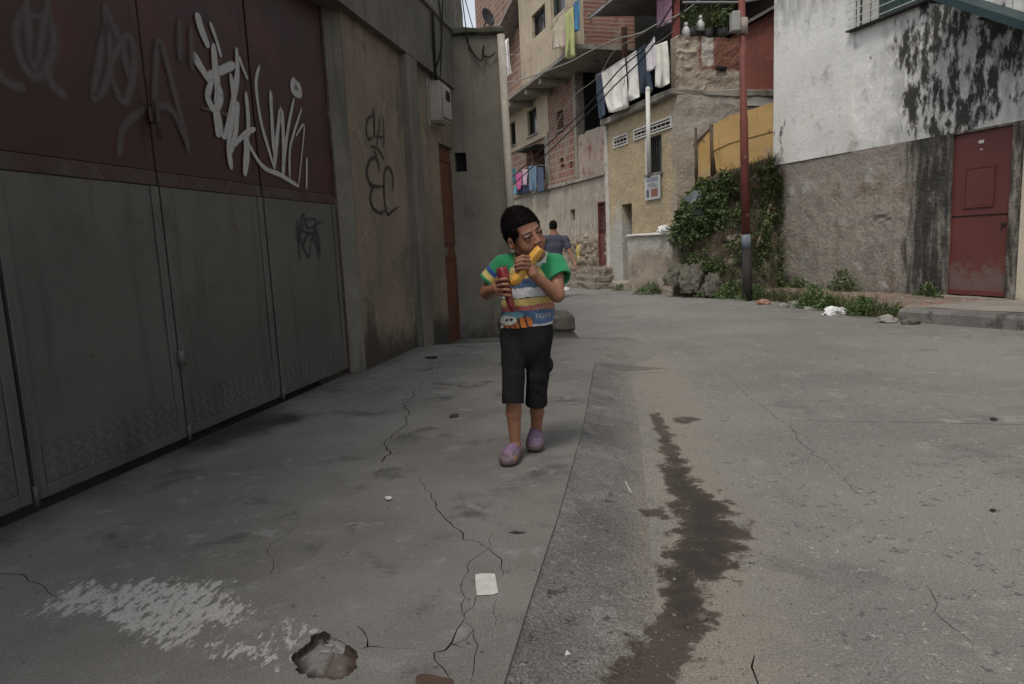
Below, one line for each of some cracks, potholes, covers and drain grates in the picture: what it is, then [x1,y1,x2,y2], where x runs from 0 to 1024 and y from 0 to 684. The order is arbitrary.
crack [382,363,440,462]
pothole [291,631,358,681]
crack [420,478,504,682]
